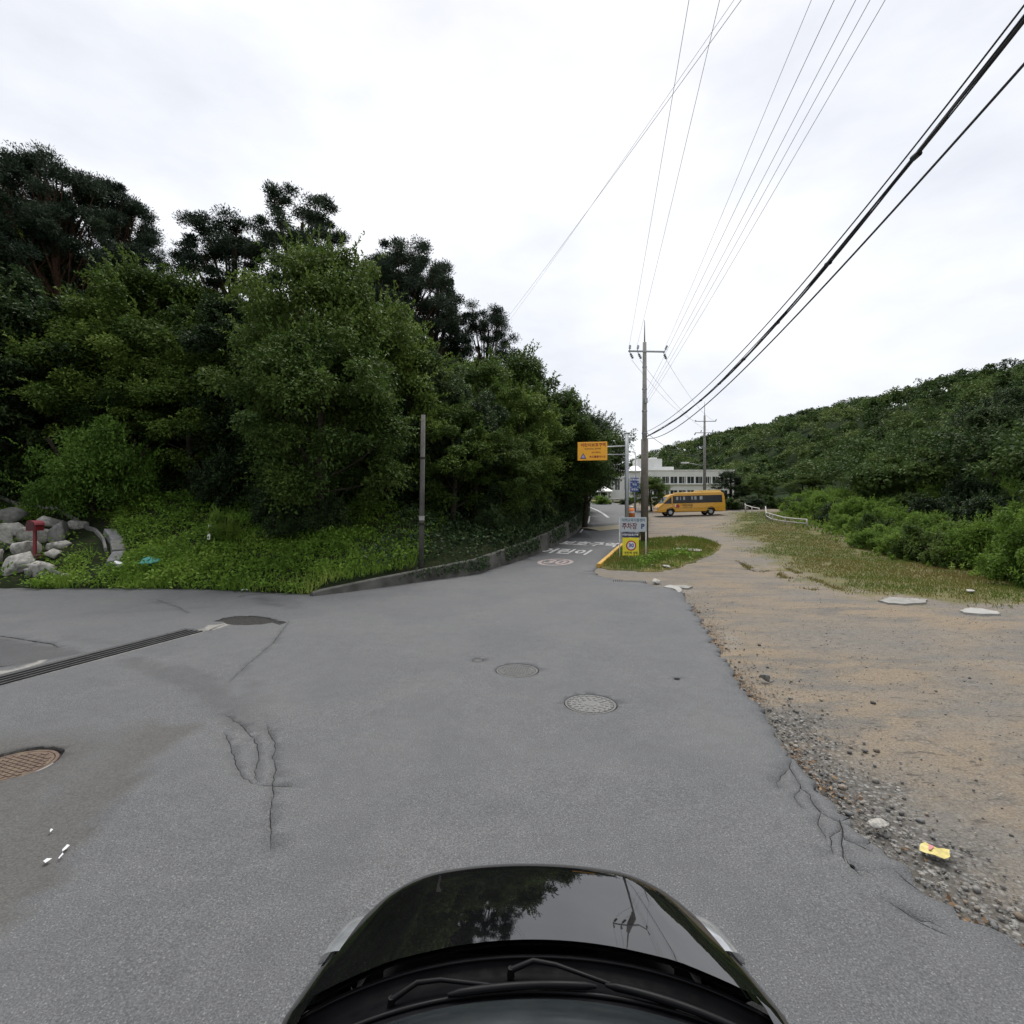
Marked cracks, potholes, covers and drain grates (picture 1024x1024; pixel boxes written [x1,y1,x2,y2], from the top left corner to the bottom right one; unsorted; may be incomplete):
crack [777,767,891,875]
crack [224,715,289,852]
manhole cover [0,746,65,781]
manhole cover [496,664,538,677]
manhole cover [565,695,617,714]
